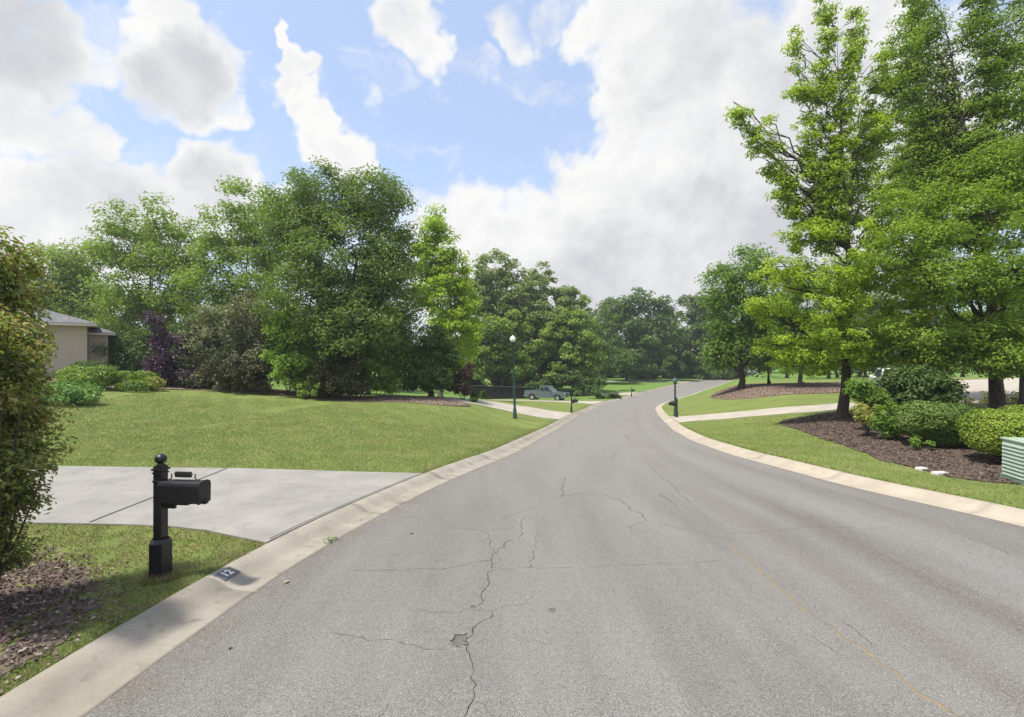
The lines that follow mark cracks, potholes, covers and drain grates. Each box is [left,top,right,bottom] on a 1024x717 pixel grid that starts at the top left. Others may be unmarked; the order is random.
pothole [450,633,468,648]
crack [350,508,570,717]
